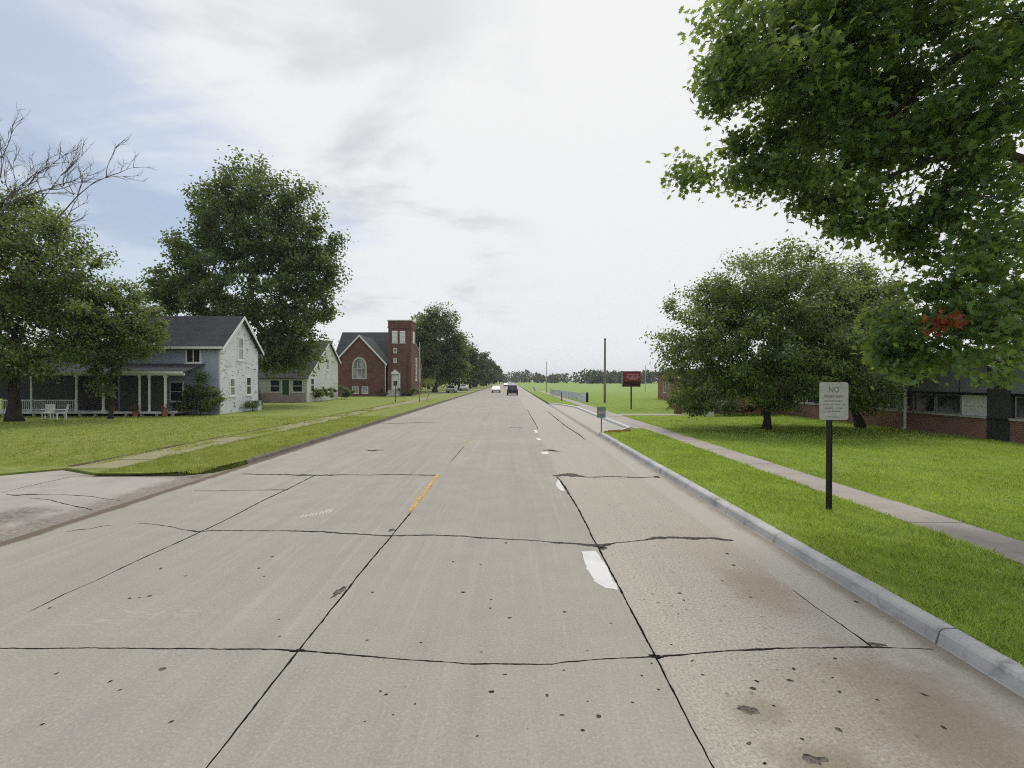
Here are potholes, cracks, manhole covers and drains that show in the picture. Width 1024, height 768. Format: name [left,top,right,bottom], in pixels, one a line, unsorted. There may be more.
pothole [802,753,829,765]
pothole [736,705,760,715]
